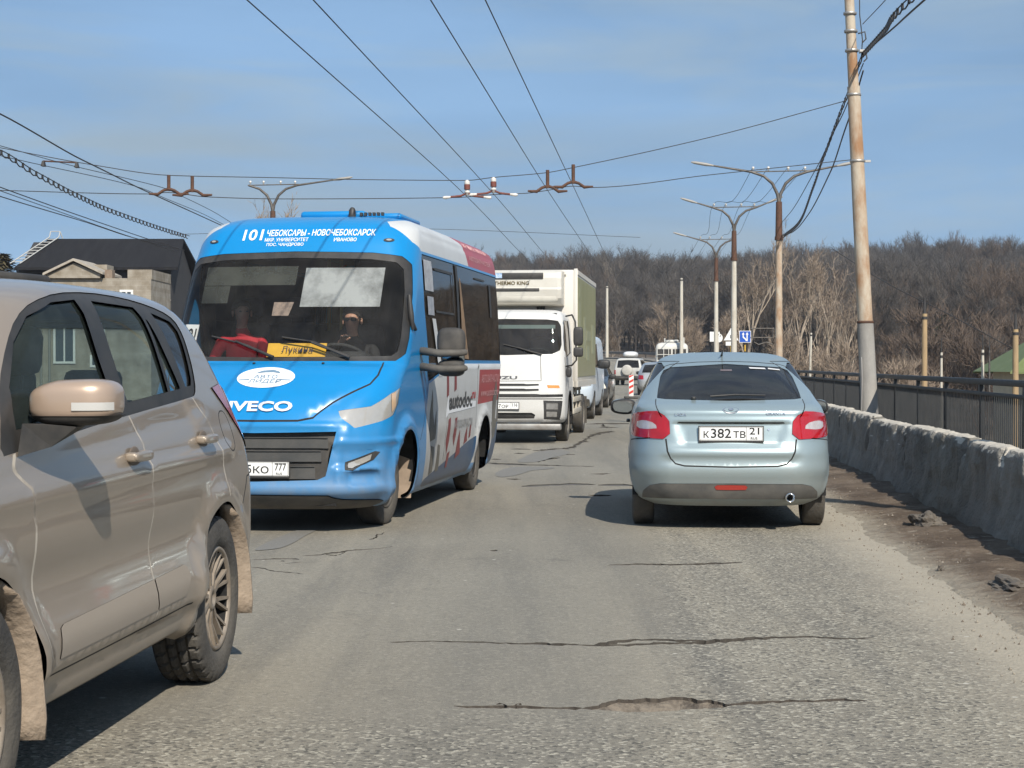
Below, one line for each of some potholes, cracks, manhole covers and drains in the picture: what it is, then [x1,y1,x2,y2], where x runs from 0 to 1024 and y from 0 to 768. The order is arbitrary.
crack [493,423,629,462]
crack [392,636,870,646]
crack [251,533,387,574]
